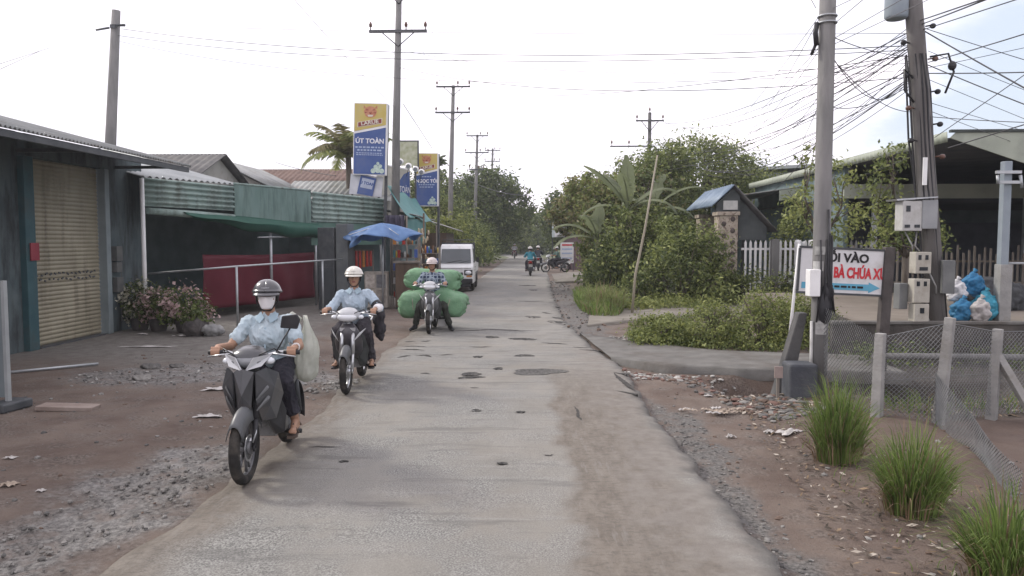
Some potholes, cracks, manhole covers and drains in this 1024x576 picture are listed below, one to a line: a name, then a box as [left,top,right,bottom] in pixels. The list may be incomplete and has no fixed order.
crack [614,372,638,397]
